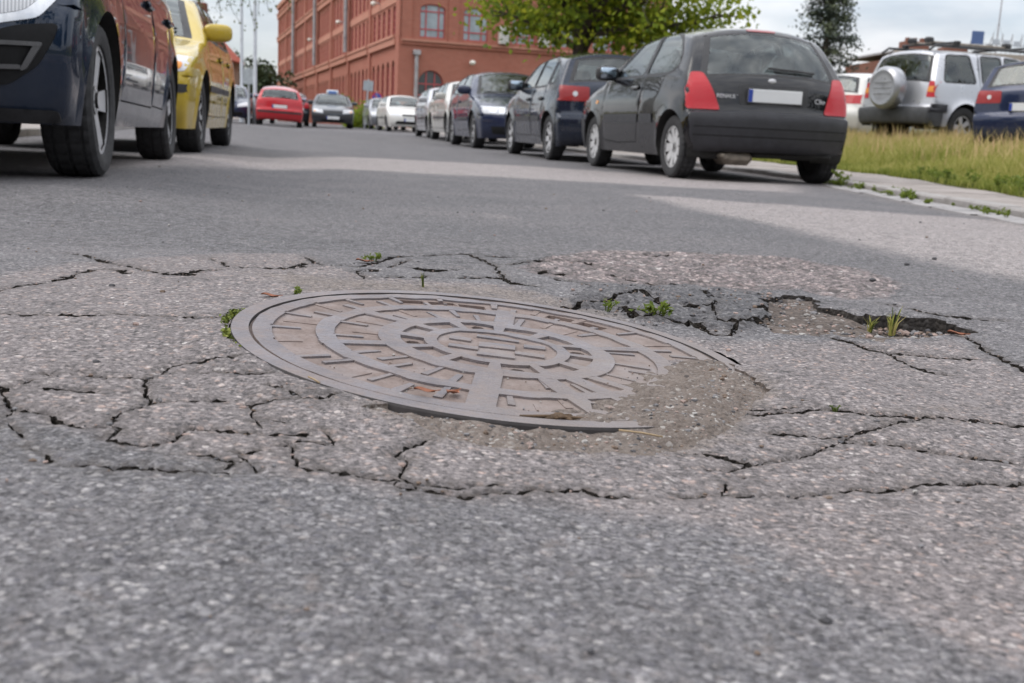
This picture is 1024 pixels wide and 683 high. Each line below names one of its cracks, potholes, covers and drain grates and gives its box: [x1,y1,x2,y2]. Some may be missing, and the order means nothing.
crack [0,253,1024,501]
pothole [759,295,979,342]
manhole cover [230,290,756,434]
